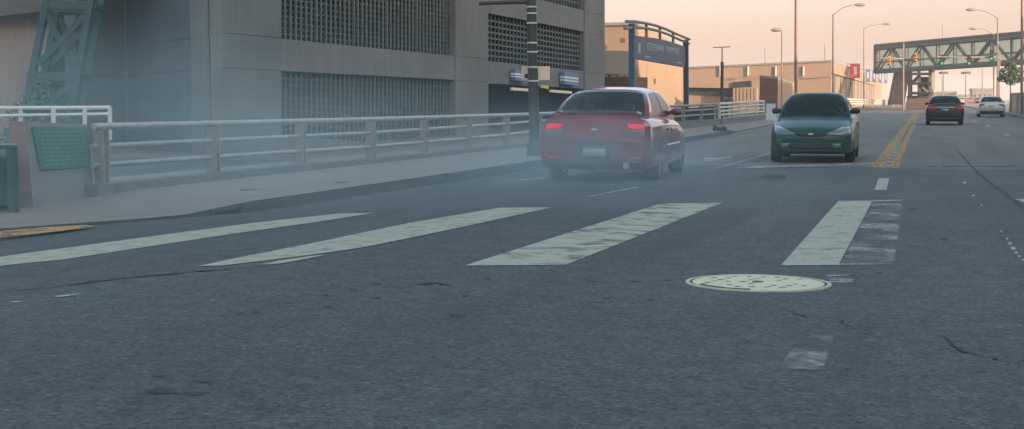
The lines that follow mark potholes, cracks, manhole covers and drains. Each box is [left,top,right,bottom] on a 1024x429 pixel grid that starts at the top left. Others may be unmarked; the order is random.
manhole cover [685,274,832,292]
crack [940,334,1000,360]
